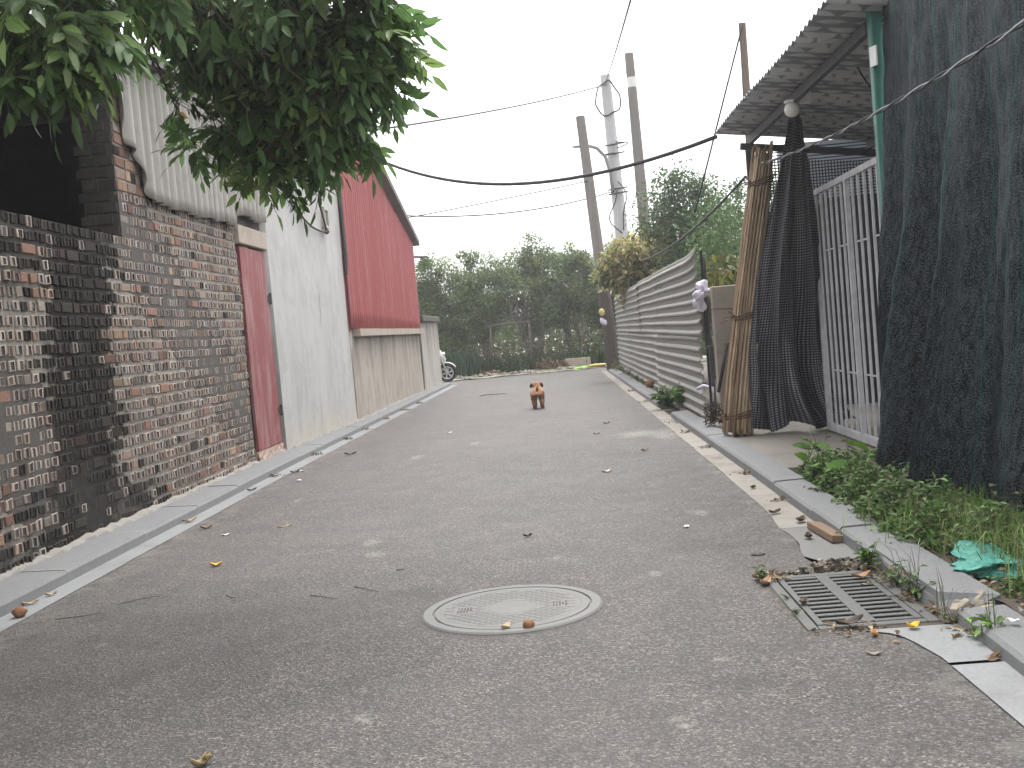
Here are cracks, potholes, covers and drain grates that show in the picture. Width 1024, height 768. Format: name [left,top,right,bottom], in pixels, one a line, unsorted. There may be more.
drain grate [757,561,950,635]
manhole cover [422,584,603,635]
